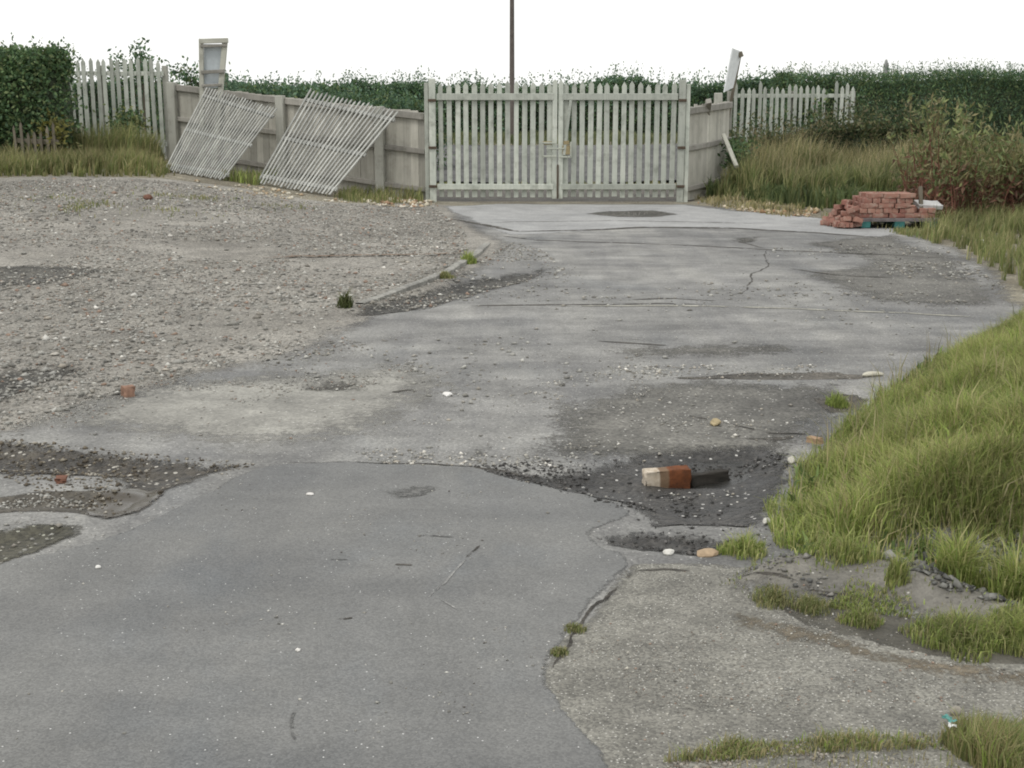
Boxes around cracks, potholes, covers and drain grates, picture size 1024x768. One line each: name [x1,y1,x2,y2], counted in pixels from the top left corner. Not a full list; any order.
pothole [0,442,240,513]
pothole [347,268,549,315]
crack [454,219,859,294]
pothole [607,532,732,555]
crack [553,587,618,666]
pothole [488,445,790,527]
pothole [0,524,82,562]
pothole [305,382,362,392]
